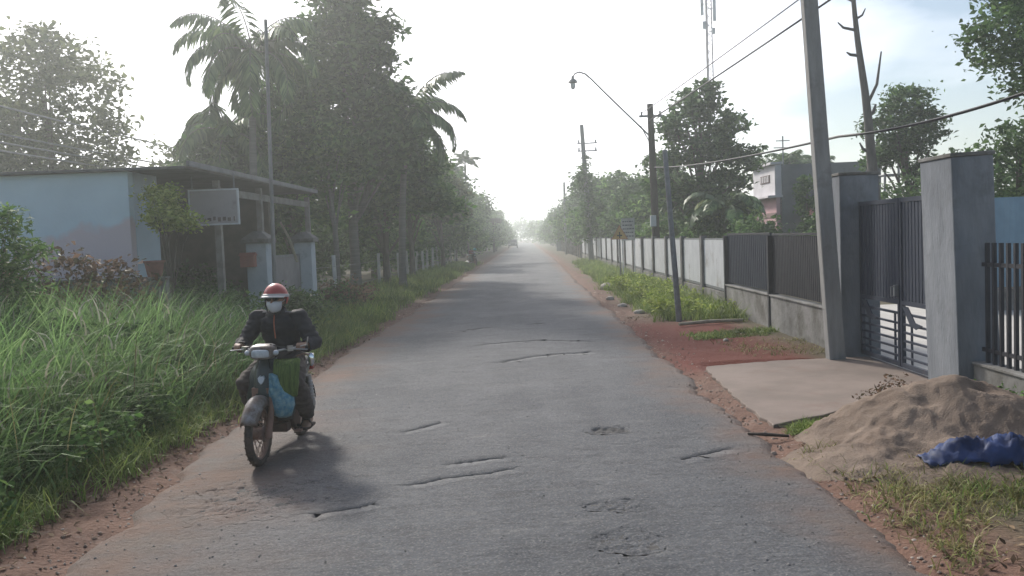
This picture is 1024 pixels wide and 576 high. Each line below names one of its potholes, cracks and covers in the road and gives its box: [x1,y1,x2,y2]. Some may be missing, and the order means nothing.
pothole [582,425,642,435]
crack [667,445,747,465]
crack [392,420,459,436]
crack [443,322,601,365]
crack [162,454,528,527]
